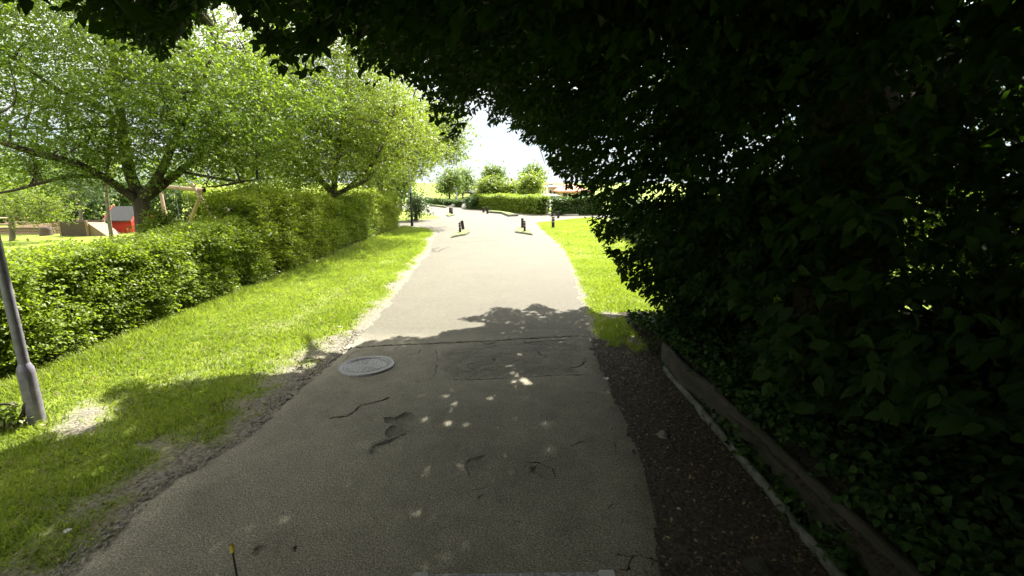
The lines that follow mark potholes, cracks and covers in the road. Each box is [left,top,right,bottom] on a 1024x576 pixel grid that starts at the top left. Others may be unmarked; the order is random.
pothole [383,412,416,440]
crack [613,553,647,571]
crack [329,397,390,419]
manhole cover [338,356,395,377]
crack [348,336,586,380]
